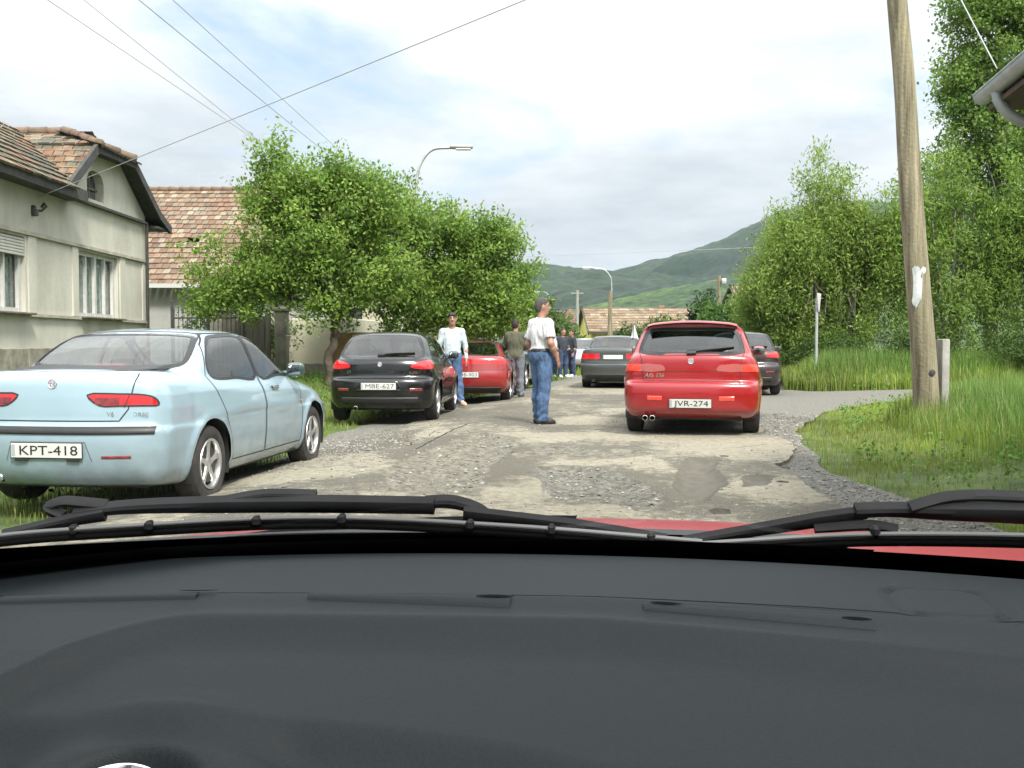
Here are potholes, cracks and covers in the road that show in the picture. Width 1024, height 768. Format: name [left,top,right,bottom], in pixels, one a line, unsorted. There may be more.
pothole [672,456,729,502]
crack [404,421,487,453]
pothole [740,474,779,487]
pothole [534,465,666,511]
